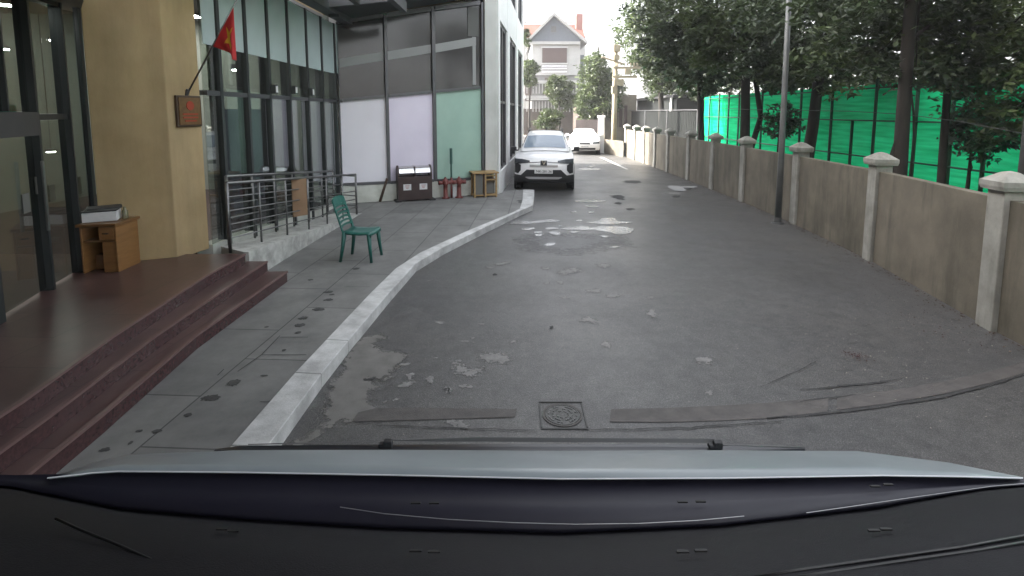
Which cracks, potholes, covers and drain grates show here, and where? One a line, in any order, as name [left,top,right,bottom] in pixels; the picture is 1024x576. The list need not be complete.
crack [763,361,900,402]
manhole cover [539,401,589,429]
